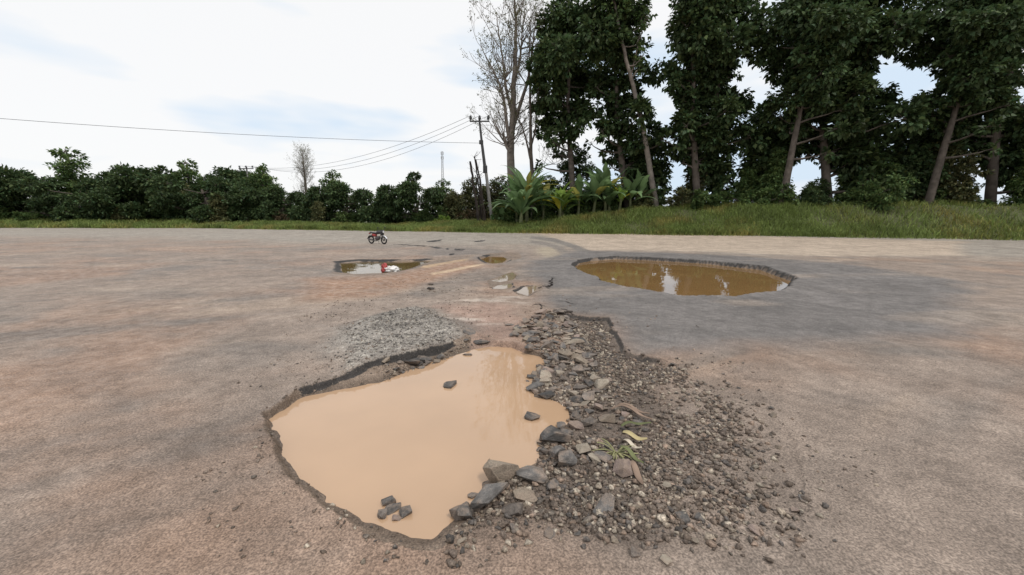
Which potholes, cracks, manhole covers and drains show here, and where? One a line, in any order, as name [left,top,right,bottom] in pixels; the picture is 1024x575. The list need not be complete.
pothole [260,332,577,551]
pothole [571,256,800,297]
pothole [440,309,813,575]
pothole [331,255,475,276]
pothole [477,252,522,264]
crack [534,277,575,315]
pothole [487,271,519,290]
pothole [513,284,543,296]
